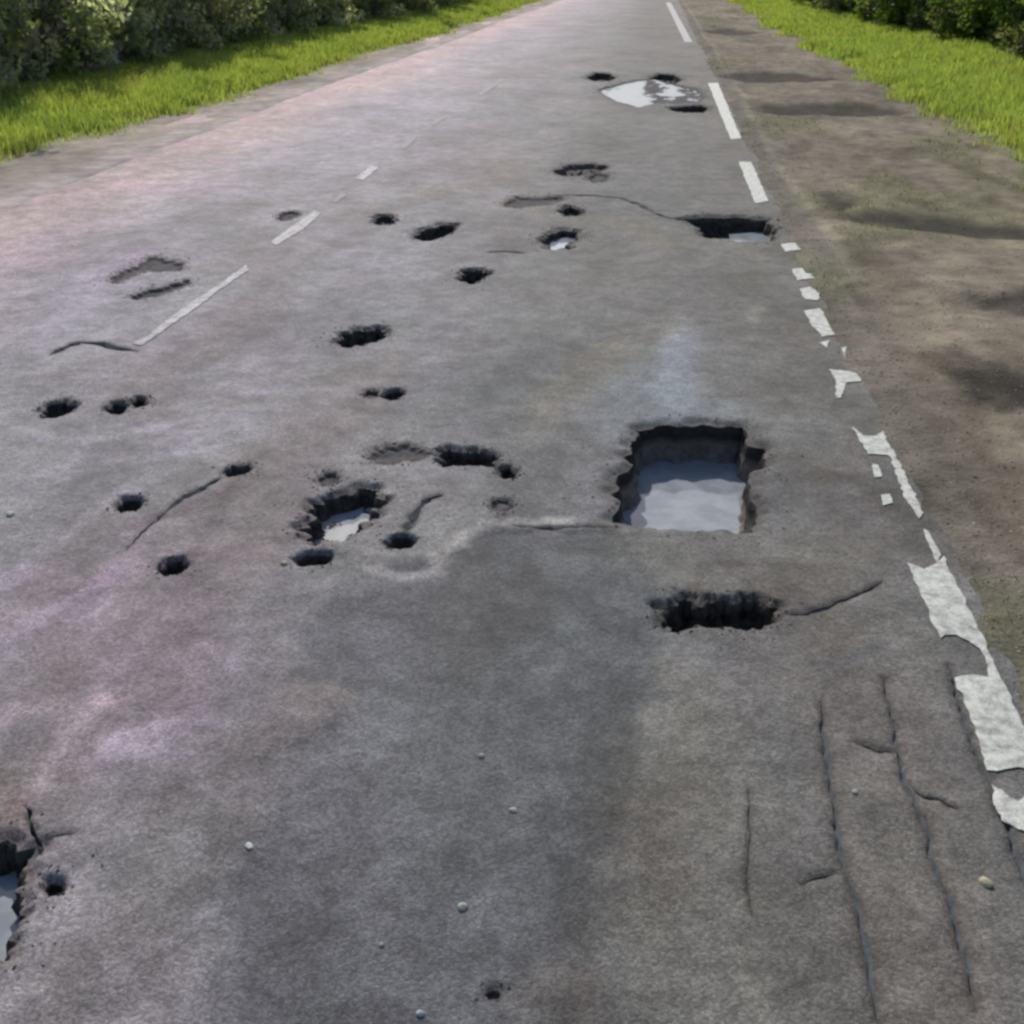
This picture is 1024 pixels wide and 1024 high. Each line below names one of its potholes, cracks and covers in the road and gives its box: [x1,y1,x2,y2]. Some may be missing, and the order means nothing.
pothole [683,217,778,241]
pothole [500,469,516,479]
pothole [109,257,185,284]
pothole [0,840,44,961]
pothole [297,488,388,546]
pothole [651,74,681,85]
pothole [336,329,387,348]
crack [783,584,880,616]
pothole [130,279,191,300]
crack [565,195,682,221]
crack [804,668,1024,1024]
pothole [42,403,77,419]
